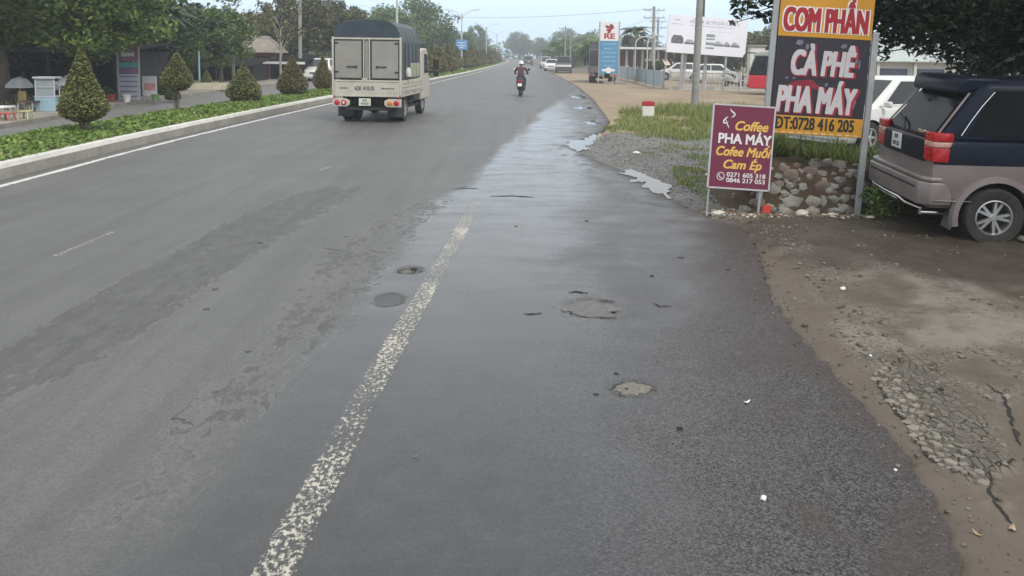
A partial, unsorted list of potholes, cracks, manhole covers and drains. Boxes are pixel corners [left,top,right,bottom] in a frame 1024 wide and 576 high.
pothole [550,295,628,322]
crack [987,383,1024,528]
crack [874,375,967,477]
